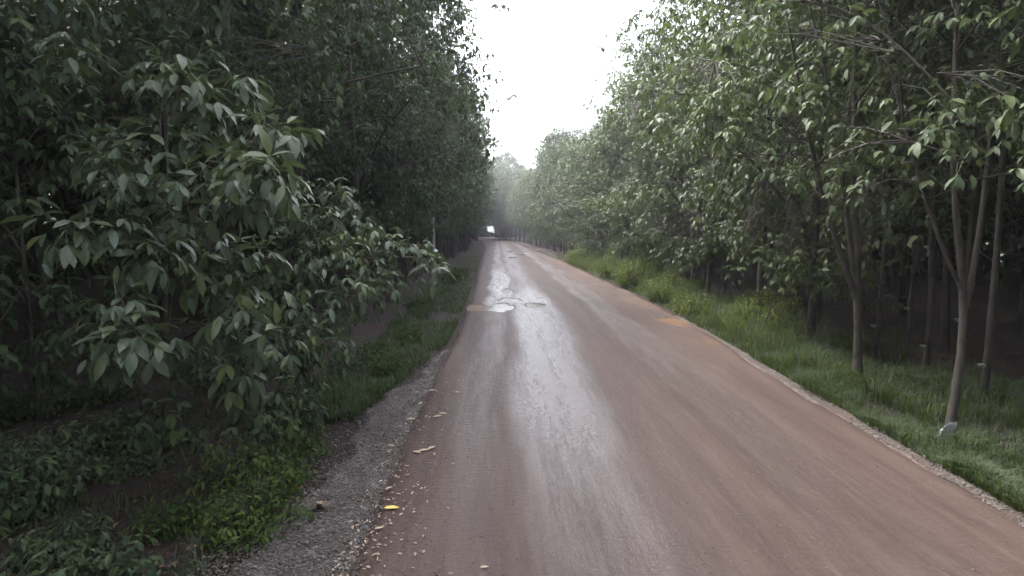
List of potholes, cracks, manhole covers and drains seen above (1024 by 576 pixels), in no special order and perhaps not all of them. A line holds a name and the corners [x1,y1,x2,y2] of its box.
pothole [484,303,517,313]
